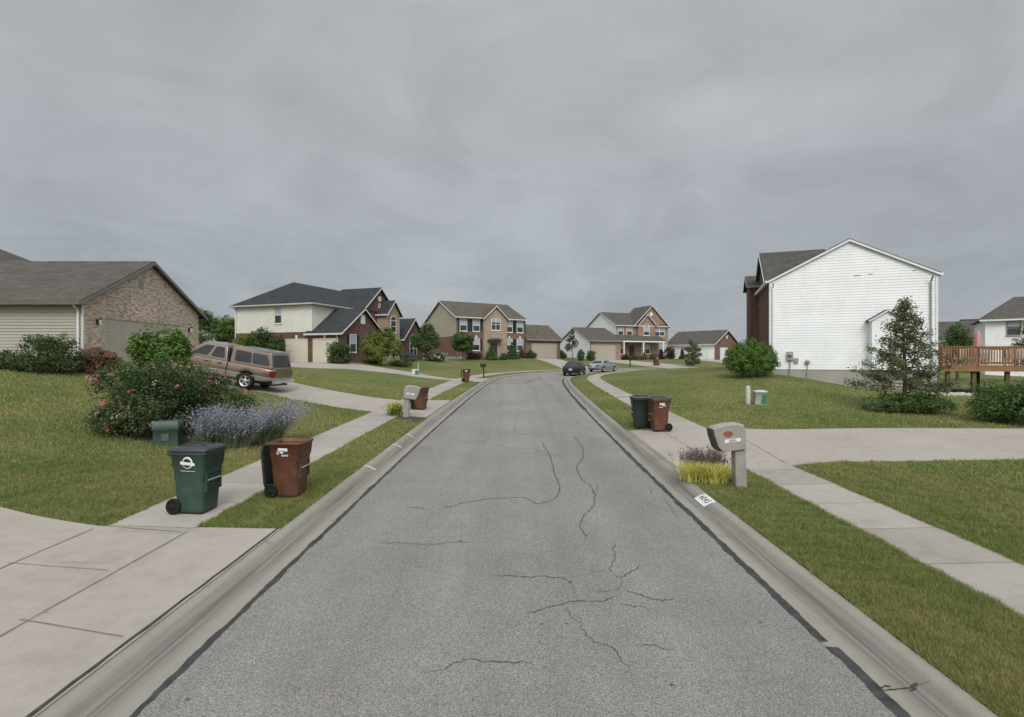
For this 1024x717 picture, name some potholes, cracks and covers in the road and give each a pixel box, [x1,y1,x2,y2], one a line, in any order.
crack [496,543,674,679]
crack [426,658,530,673]
crack [449,438,598,540]
